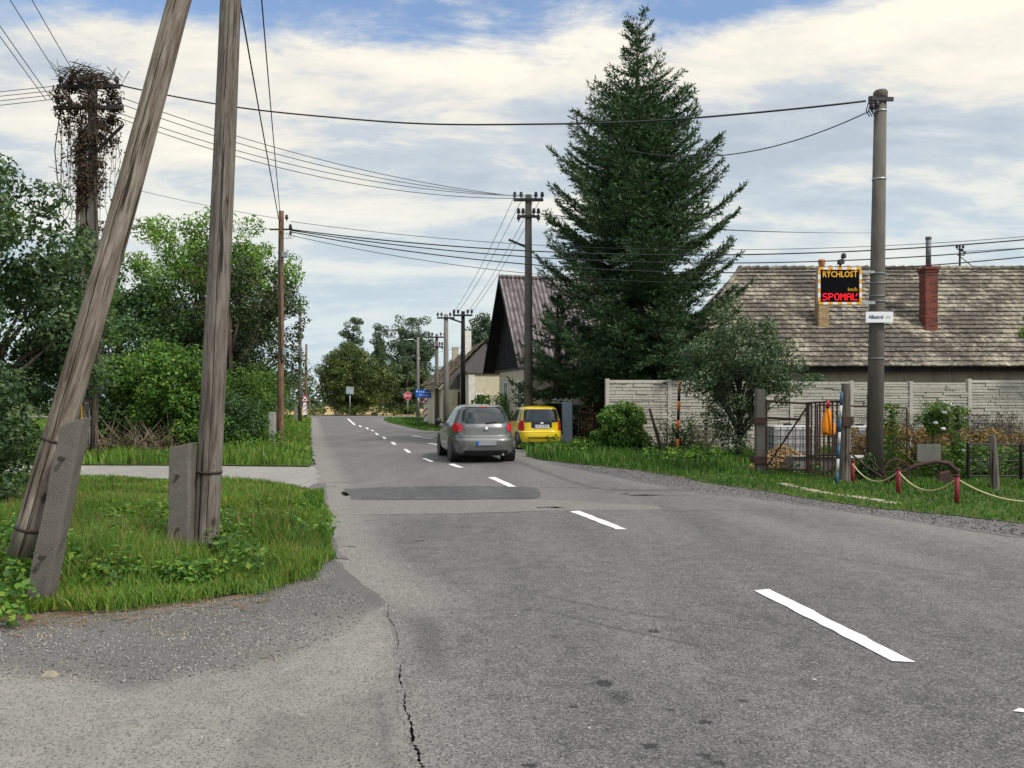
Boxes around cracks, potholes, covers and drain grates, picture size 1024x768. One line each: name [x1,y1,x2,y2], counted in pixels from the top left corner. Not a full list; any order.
crack [387,602,425,768]
